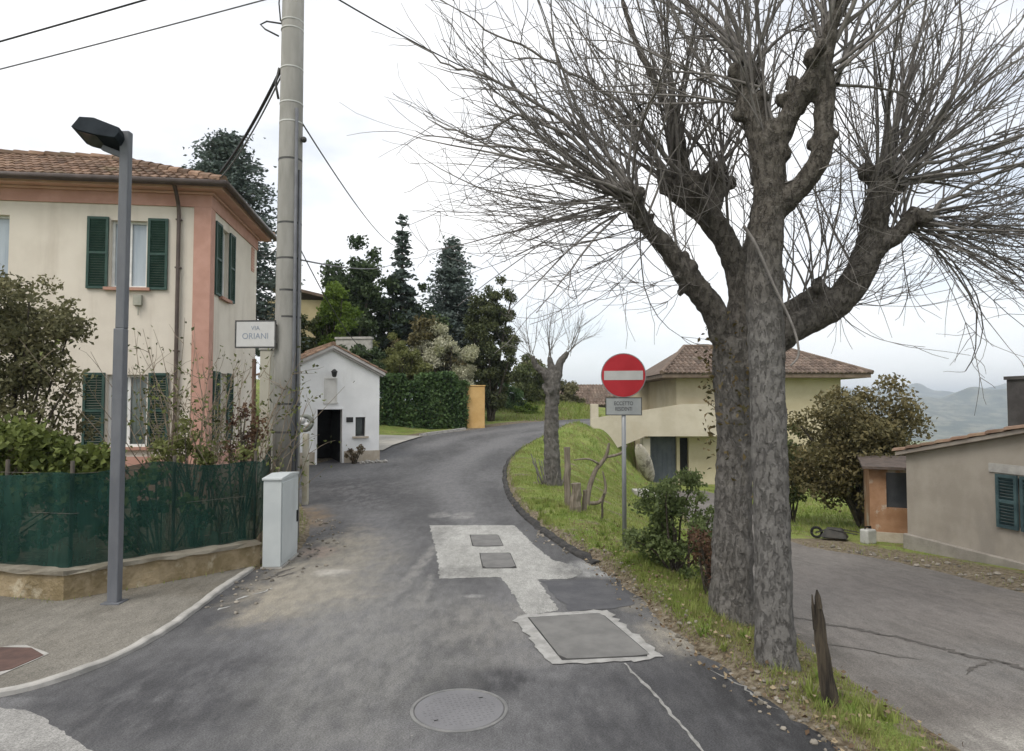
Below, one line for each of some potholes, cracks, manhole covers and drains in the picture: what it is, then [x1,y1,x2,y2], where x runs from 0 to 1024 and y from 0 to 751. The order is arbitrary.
manhole cover [470,534,503,546]
manhole cover [0,645,49,675]
crack [794,617,1024,674]
manhole cover [410,688,508,733]
manhole cover [479,553,517,568]
manhole cover [512,609,663,664]
